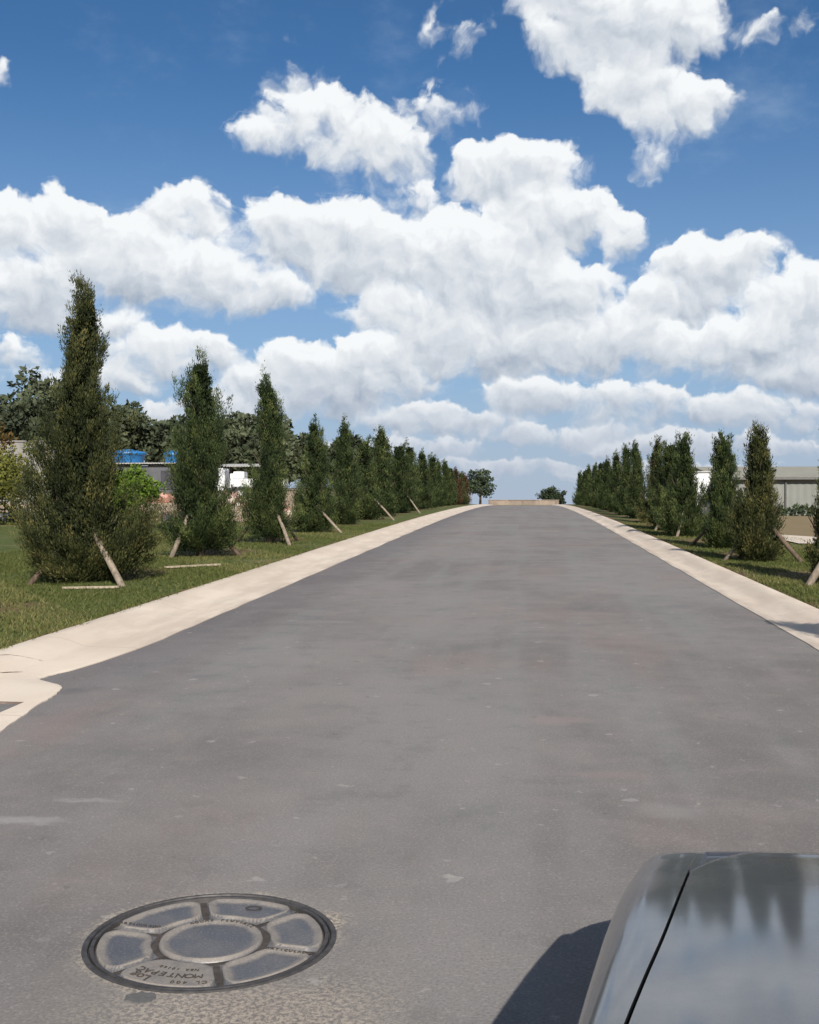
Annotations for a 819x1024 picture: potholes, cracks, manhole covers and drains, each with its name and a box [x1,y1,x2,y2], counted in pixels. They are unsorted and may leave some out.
manhole cover [82,893,336,994]
